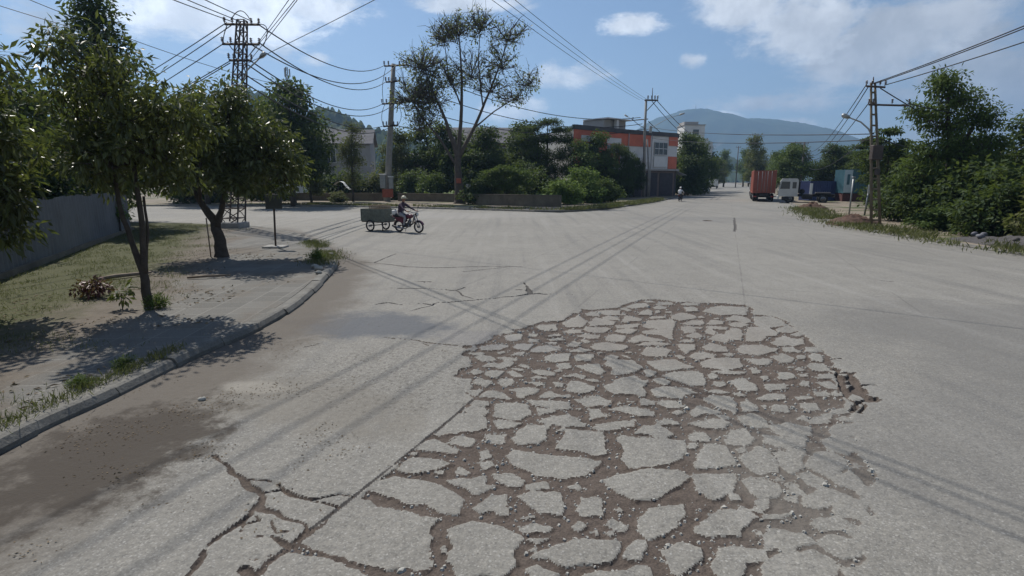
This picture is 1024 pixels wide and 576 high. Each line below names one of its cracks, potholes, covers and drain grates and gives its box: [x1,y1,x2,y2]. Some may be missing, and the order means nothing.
pothole [824,358,882,414]
crack [185,254,878,576]
